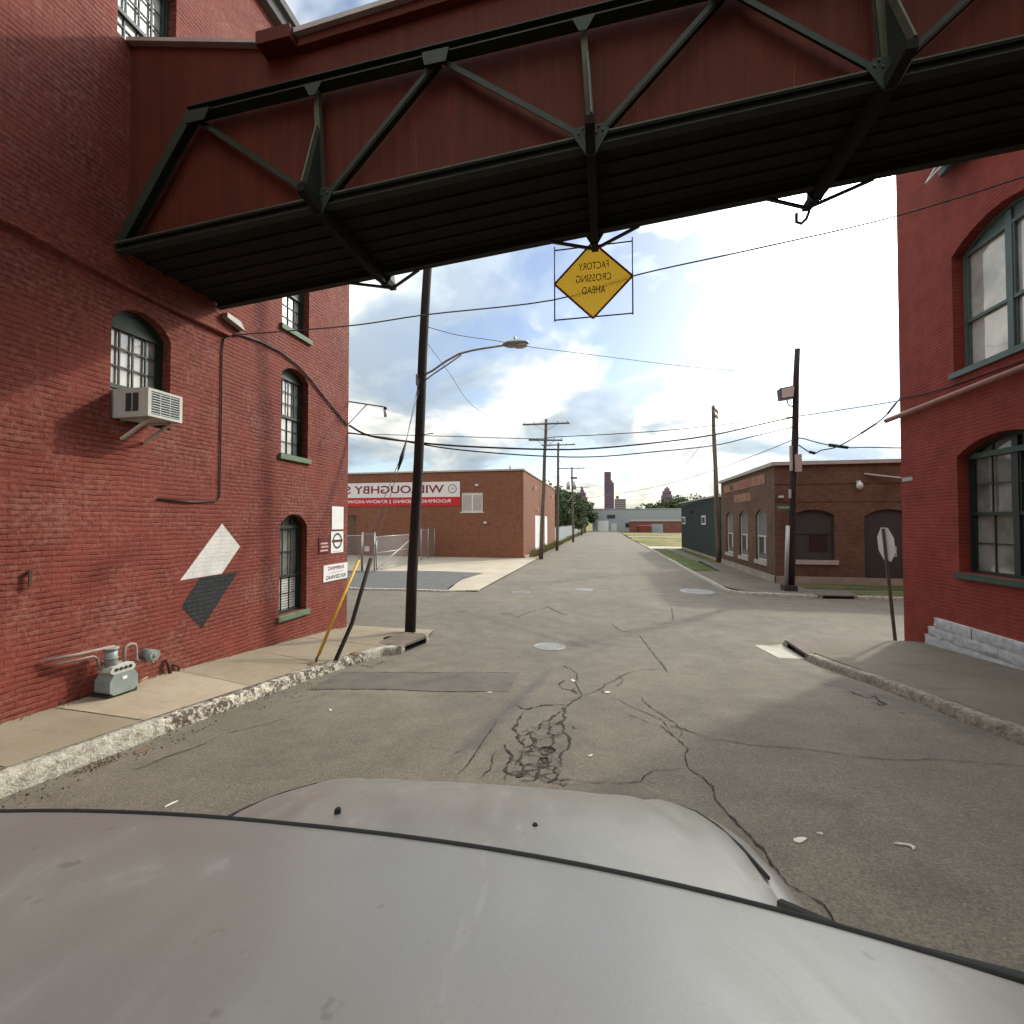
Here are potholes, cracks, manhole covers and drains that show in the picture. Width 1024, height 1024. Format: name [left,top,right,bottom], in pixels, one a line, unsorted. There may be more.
crack [585,699,1024,922]
crack [612,624,762,675]
manhole cover [533,642,565,650]
crack [451,666,664,786]
drain grate [812,591,858,599]
